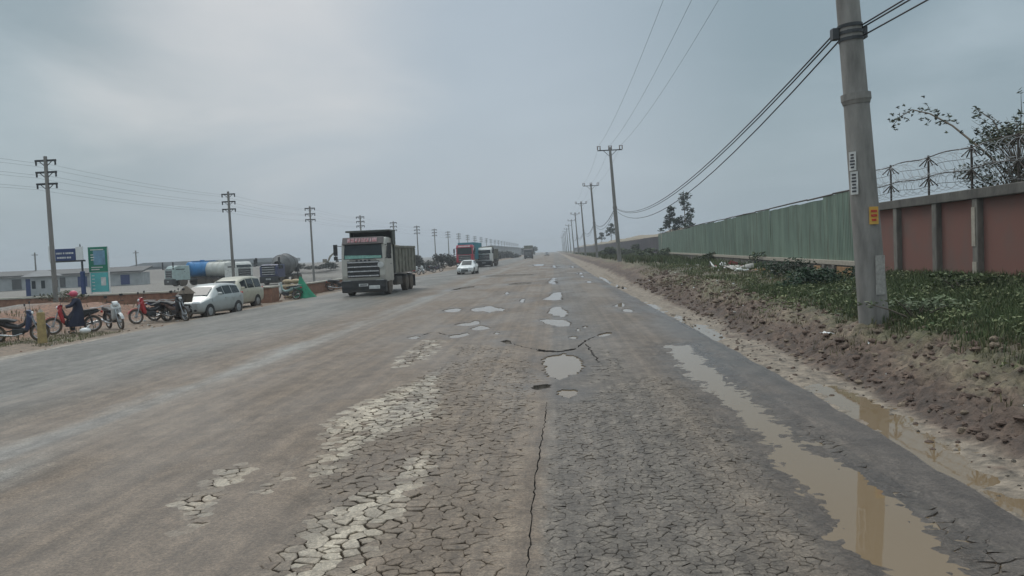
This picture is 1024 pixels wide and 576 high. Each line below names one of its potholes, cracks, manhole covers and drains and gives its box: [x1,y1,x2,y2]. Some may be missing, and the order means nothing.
pothole [556,389,578,398]
pothole [541,353,586,380]
pothole [547,306,568,317]
crack [513,337,611,366]
pothole [539,319,571,327]
pothole [542,292,563,300]
